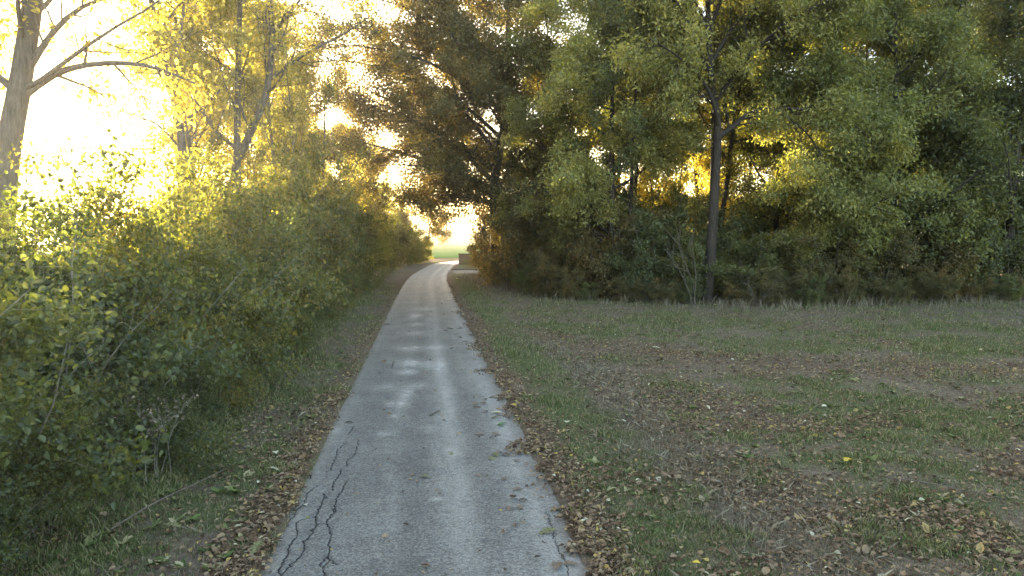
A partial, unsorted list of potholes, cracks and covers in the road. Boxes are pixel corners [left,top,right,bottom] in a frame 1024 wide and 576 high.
crack [278,427,358,576]
